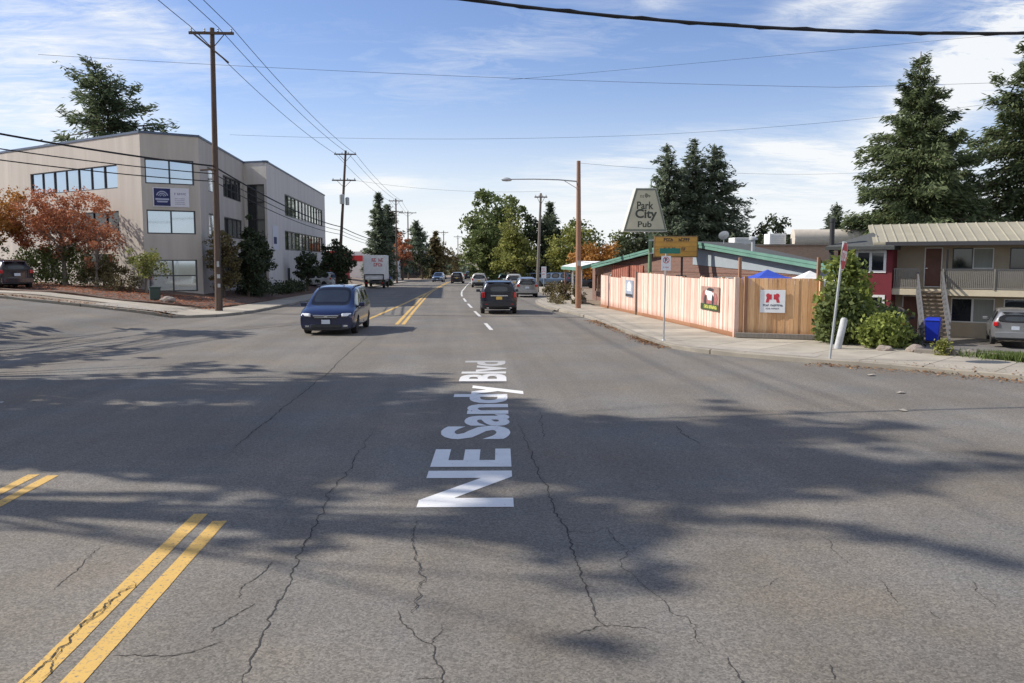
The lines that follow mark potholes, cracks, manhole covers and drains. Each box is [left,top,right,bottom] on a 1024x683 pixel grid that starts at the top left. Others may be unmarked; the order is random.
crack [120,430,374,681]
crack [521,413,661,633]
crack [23,581,136,683]
crack [611,533,709,656]
crack [398,520,445,683]
